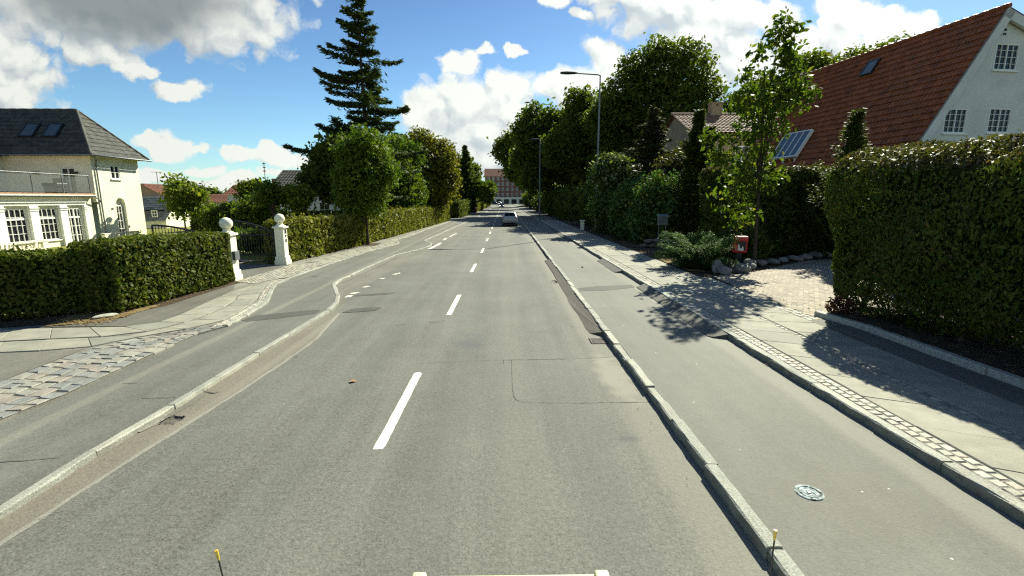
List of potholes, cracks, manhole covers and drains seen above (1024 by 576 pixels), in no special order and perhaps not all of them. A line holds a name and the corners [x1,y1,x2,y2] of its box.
pothole [159,414,185,425]
manhole cover [794,485,825,501]
